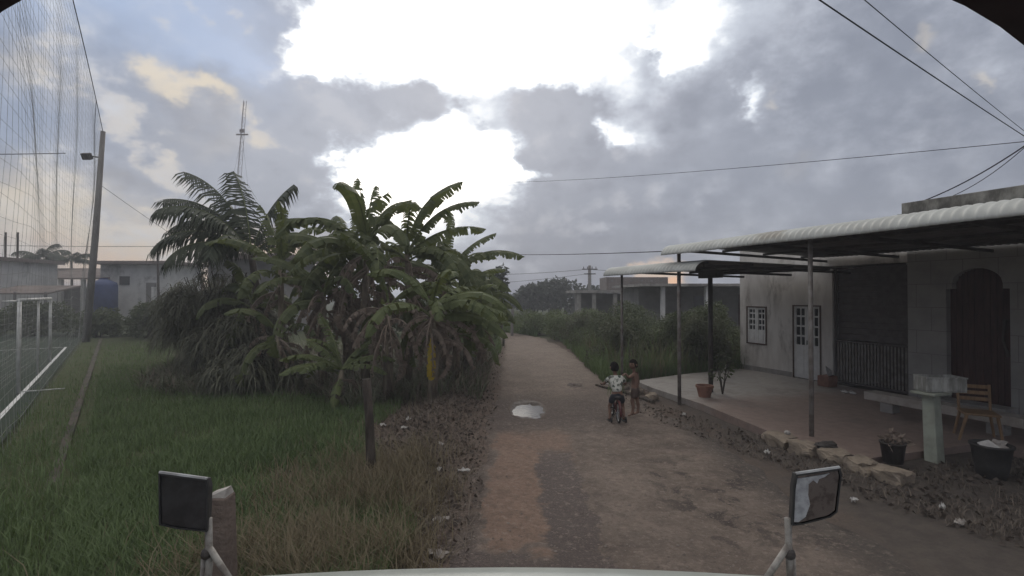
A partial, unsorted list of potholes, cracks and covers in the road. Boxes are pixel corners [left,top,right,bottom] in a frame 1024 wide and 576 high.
pothole [508,399,547,421]
